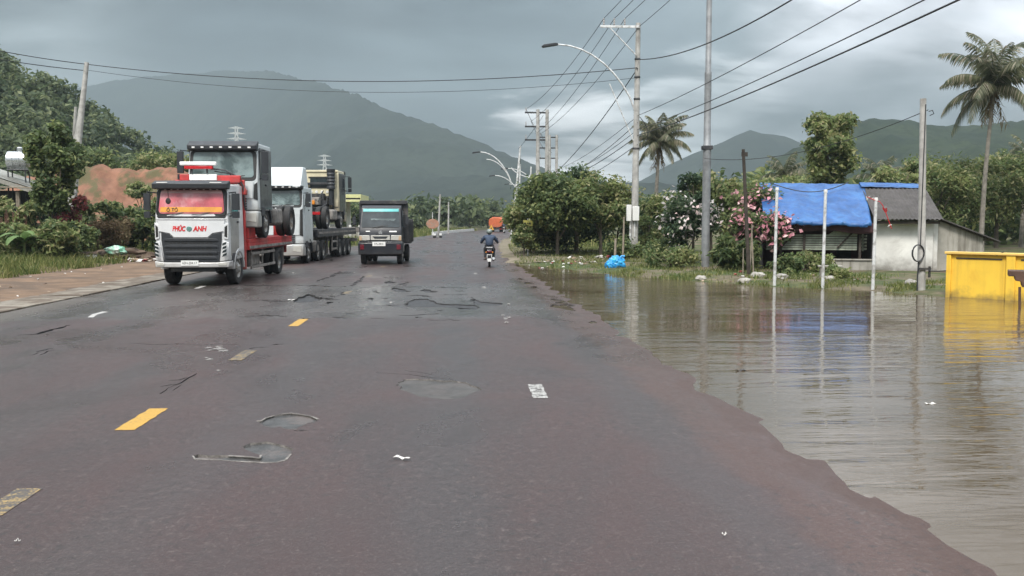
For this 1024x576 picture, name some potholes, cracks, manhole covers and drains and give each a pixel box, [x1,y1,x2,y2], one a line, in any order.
pothole [257,413,319,430]
crack [245,271,468,321]
crack [27,325,69,355]
pothole [192,441,293,463]
crack [160,374,196,394]
